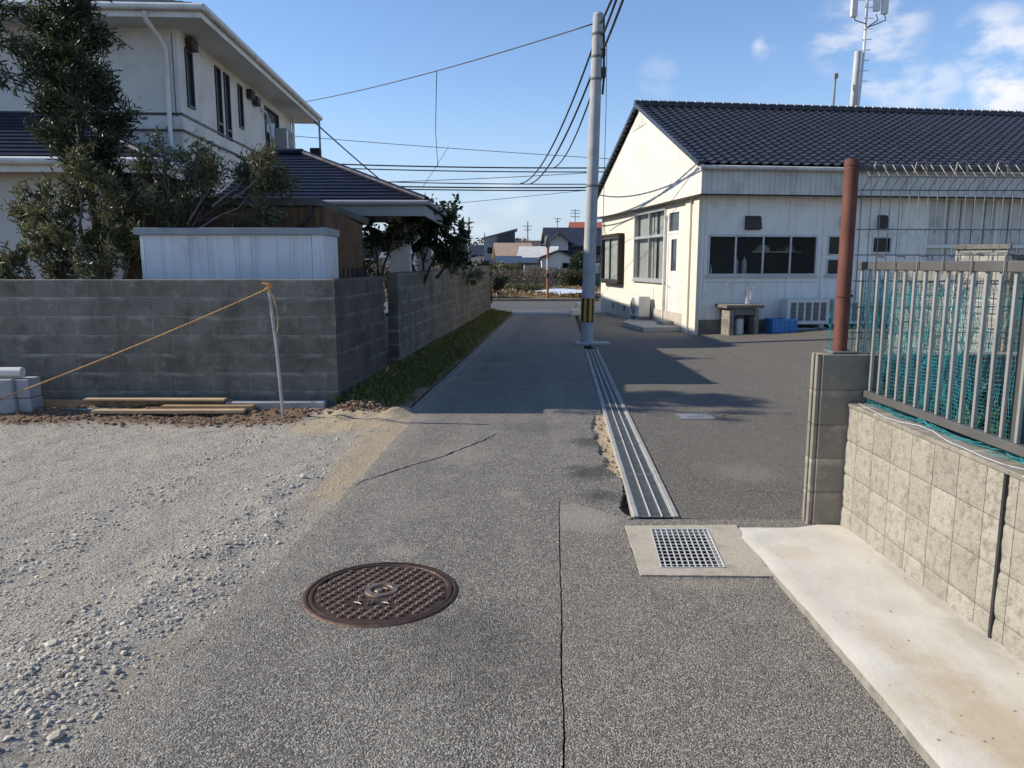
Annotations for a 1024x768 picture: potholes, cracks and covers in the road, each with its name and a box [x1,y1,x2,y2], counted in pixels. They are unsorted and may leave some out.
drain grate [599,388,620,402]
drain grate [596,377,613,388]
drain grate [650,529,726,568]
drain grate [609,420,639,443]
pothole [590,414,622,478]
drain grate [616,443,653,474]
drain grate [626,473,673,518]
drain grate [603,402,628,420]
drain grate [592,367,608,377]
pothole [619,479,630,516]
crack [355,433,498,487]
manhole cover [301,562,458,628]
